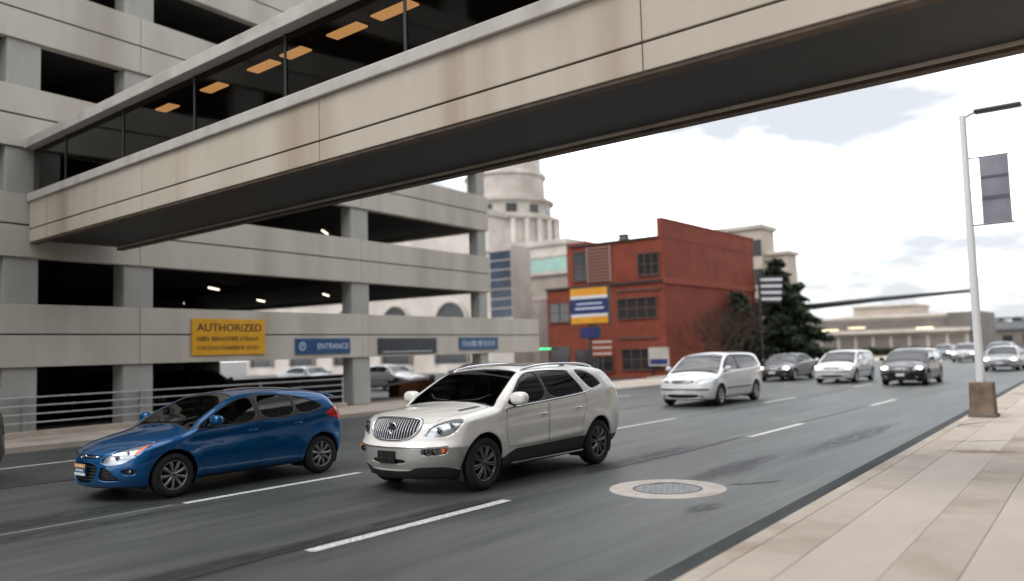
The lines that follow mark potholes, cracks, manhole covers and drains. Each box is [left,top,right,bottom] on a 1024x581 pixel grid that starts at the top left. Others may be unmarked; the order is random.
manhole cover [609,479,727,499]
